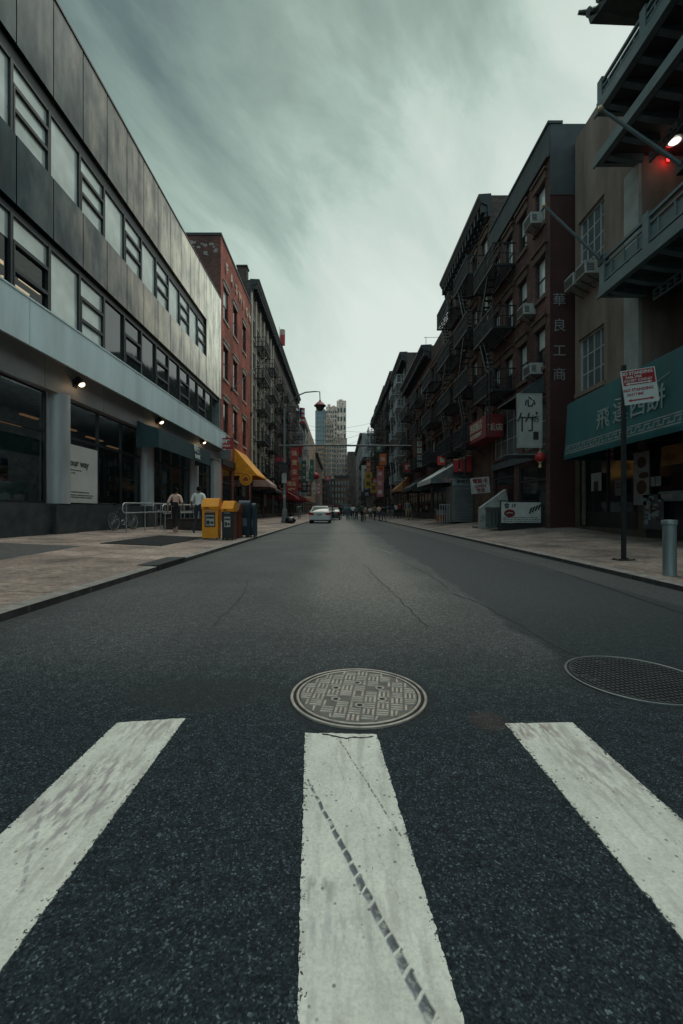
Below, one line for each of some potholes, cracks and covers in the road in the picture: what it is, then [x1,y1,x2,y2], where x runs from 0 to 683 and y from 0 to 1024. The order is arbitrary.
manhole cover [564,656,683,707]
manhole cover [290,668,427,730]
crack [364,565,429,627]
